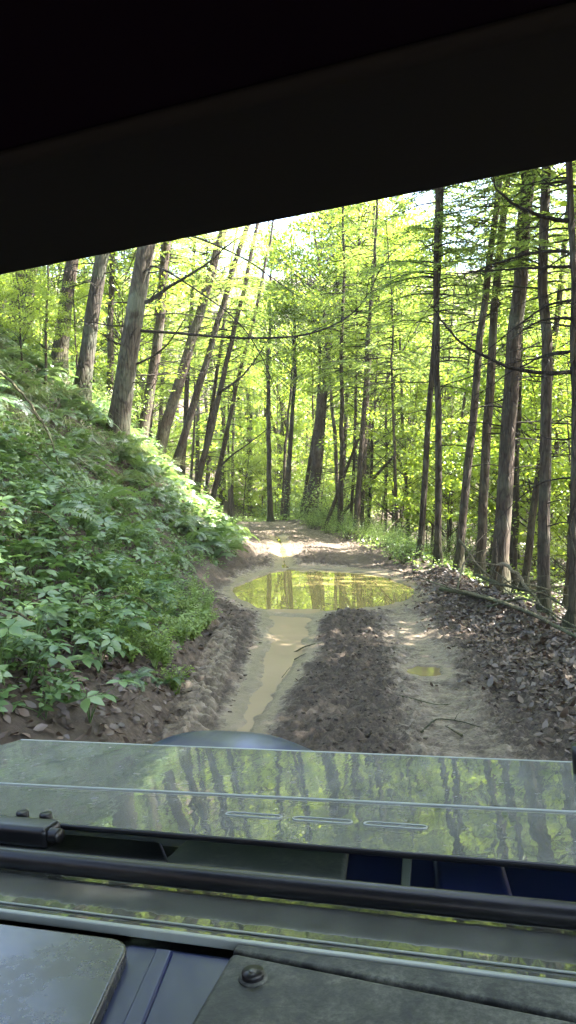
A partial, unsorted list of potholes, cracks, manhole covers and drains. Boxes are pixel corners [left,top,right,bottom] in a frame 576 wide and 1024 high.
pothole [399,663,453,680]
pothole [220,566,427,616]
